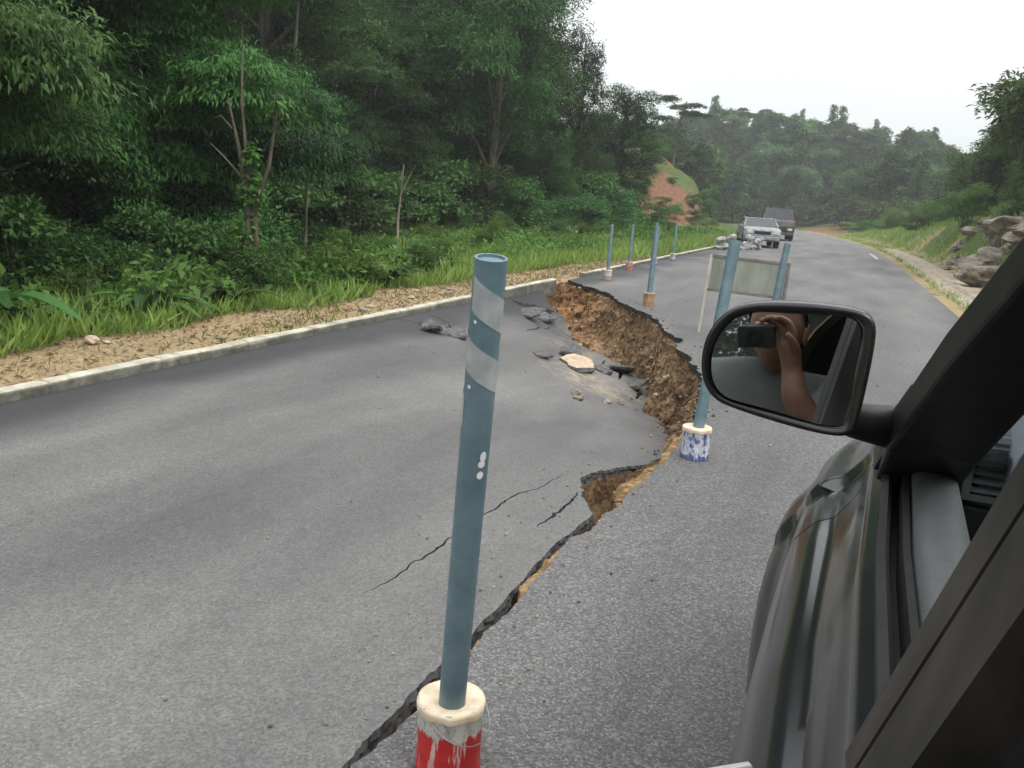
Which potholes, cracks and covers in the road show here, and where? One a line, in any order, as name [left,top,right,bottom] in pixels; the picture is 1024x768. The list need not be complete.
crack [342,475,623,768]
